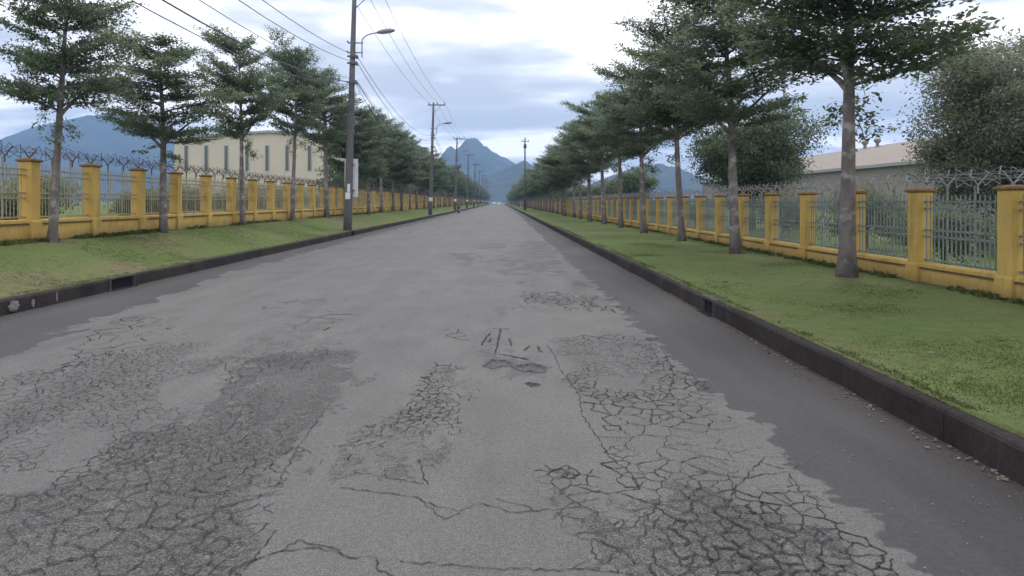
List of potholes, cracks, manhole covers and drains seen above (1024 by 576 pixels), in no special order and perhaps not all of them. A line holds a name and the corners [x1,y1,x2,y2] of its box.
crack [0,342,600,576]
crack [511,292,633,313]
drain grate [697,294,728,317]
crack [445,328,542,359]
crack [259,299,359,330]
crack [42,315,175,374]
drain grate [102,273,138,291]
crack [320,334,899,576]
